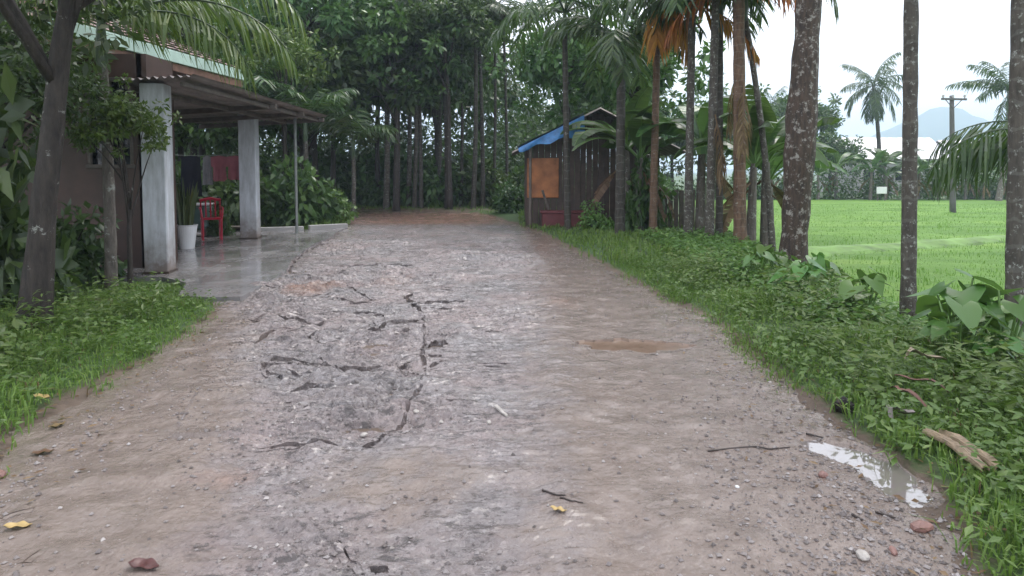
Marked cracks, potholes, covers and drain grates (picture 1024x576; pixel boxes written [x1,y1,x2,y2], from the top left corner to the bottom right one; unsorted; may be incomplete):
crack [229,262,501,451]
pothole [571,337,700,355]
